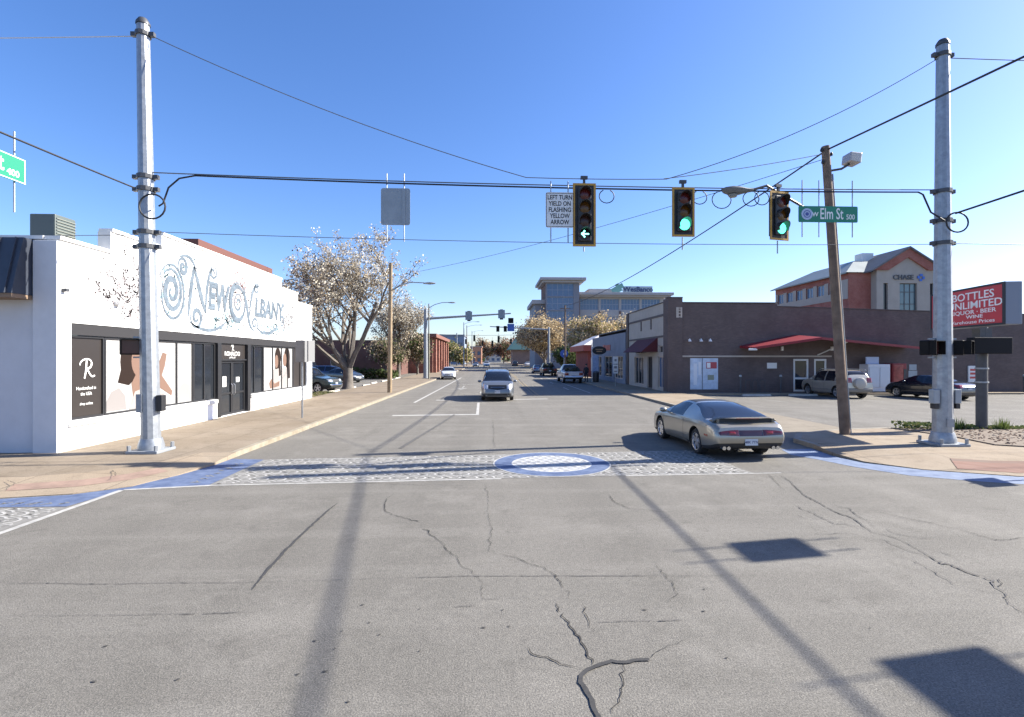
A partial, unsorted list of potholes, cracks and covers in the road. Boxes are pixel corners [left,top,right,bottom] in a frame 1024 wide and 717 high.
crack [746,476,1023,611]
crack [612,665,633,717]
crack [380,483,594,668]
